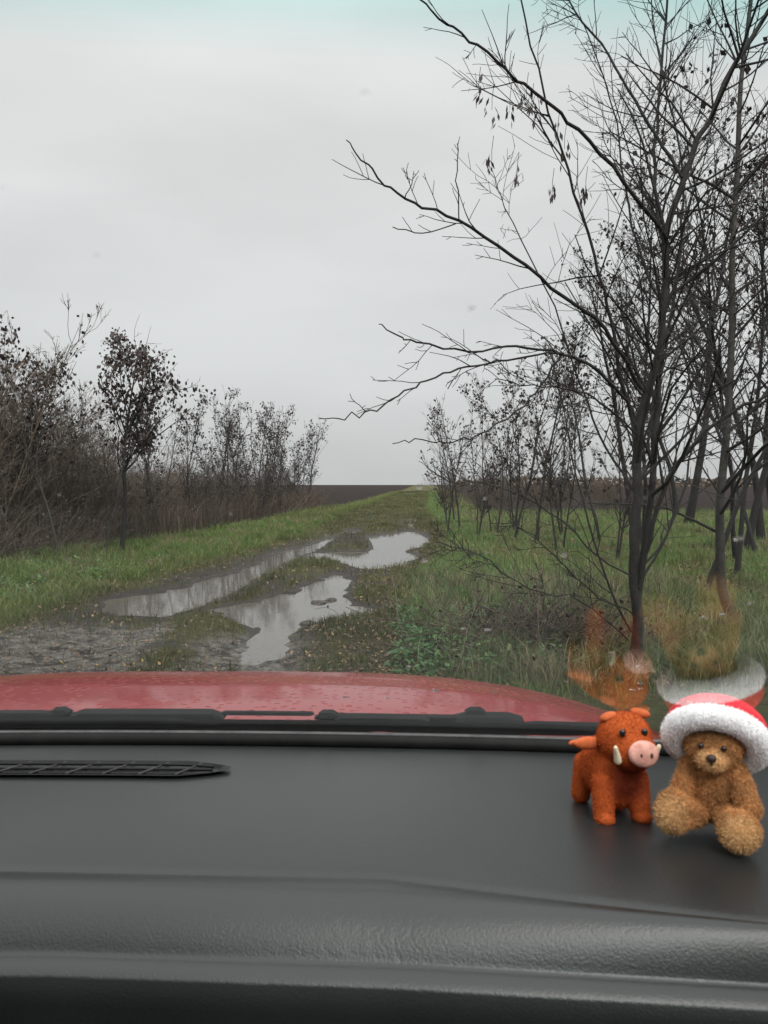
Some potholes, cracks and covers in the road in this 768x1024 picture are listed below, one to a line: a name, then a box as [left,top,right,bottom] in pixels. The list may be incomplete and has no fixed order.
pothole [199,572,389,667]
pothole [303,530,433,569]
pothole [84,530,363,618]
